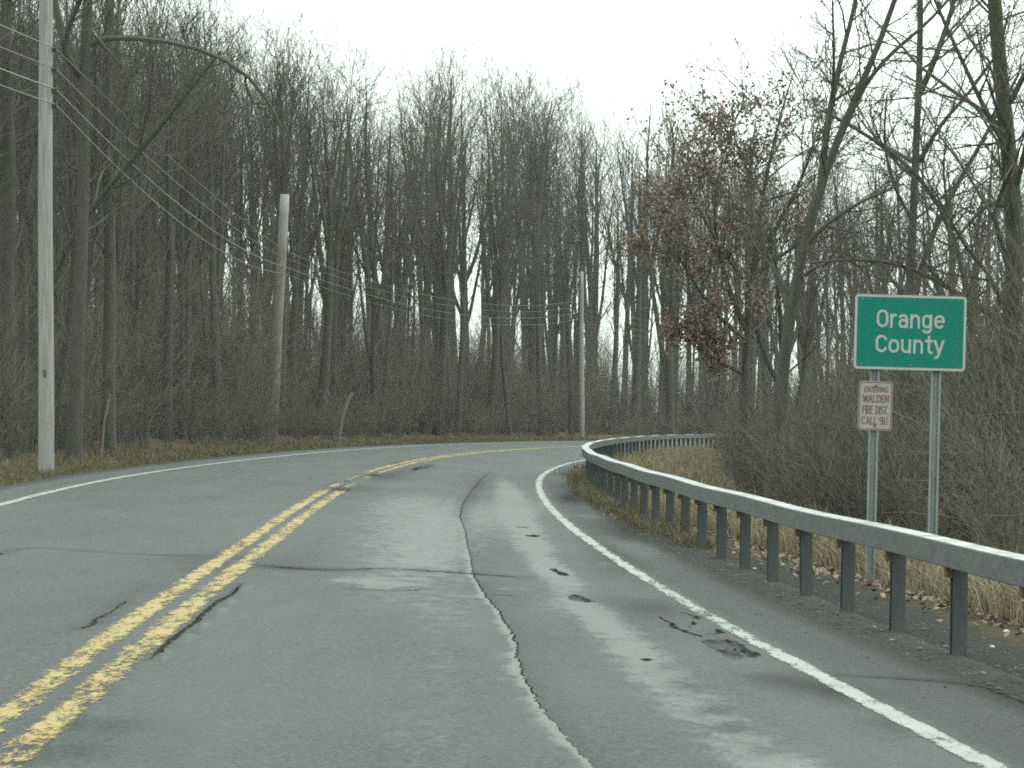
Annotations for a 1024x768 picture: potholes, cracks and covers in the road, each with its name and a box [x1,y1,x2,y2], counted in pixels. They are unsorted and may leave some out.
crack [0,547,193,556]
crack [150,584,242,660]
crack [262,475,592,766]
pothole [700,639,762,660]
pothole [568,594,594,602]
crack [77,601,126,630]
